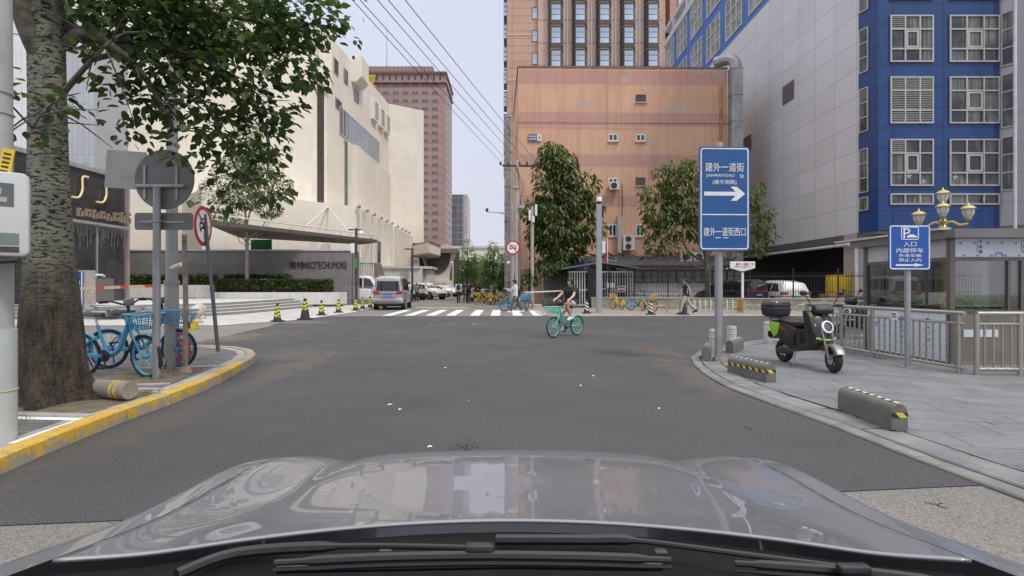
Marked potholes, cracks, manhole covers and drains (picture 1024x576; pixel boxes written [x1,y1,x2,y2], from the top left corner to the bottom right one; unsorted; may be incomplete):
pothole [449,442,478,451]
